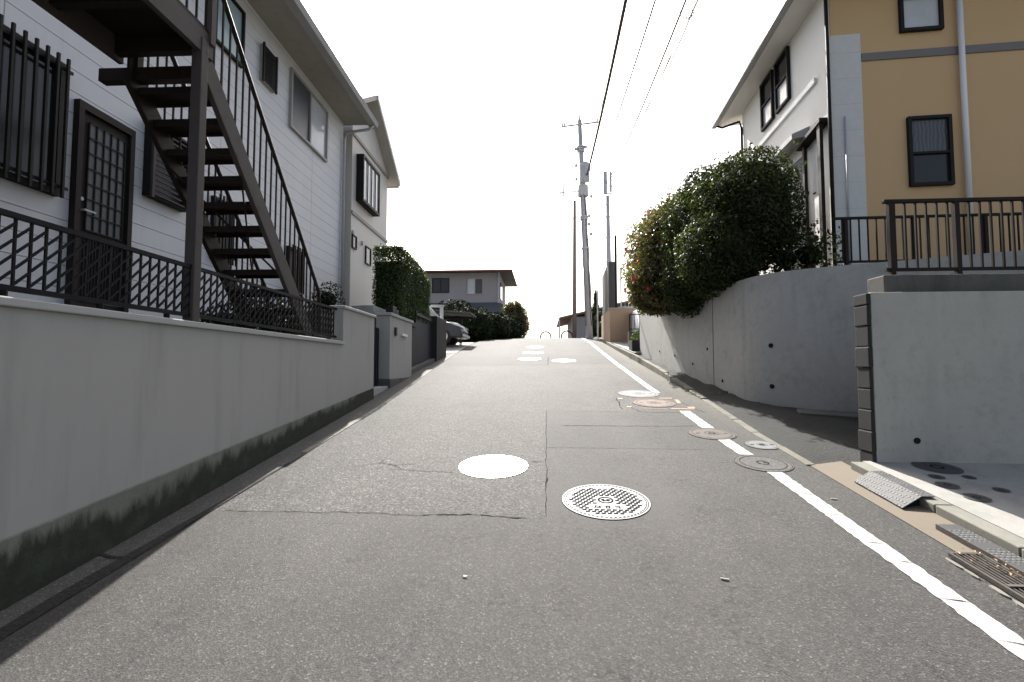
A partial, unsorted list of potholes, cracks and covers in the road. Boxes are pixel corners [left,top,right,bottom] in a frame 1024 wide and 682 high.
manhole cover [632,399,676,407]
manhole cover [744,440,778,450]
manhole cover [618,390,660,398]
manhole cover [458,455,528,479]
manhole cover [561,484,651,520]
drain grate [948,552,1024,603]
manhole cover [733,454,794,472]
manhole cover [688,428,737,440]
